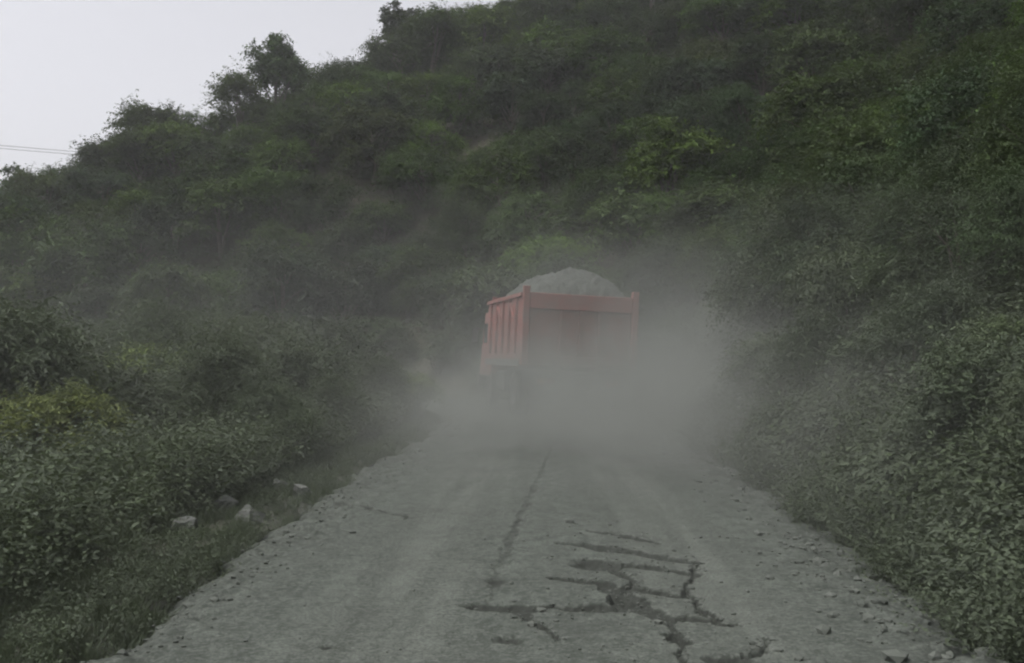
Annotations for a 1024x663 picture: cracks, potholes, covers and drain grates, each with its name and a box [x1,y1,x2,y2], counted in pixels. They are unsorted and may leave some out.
crack [333,501,411,519]
crack [464,440,771,663]
